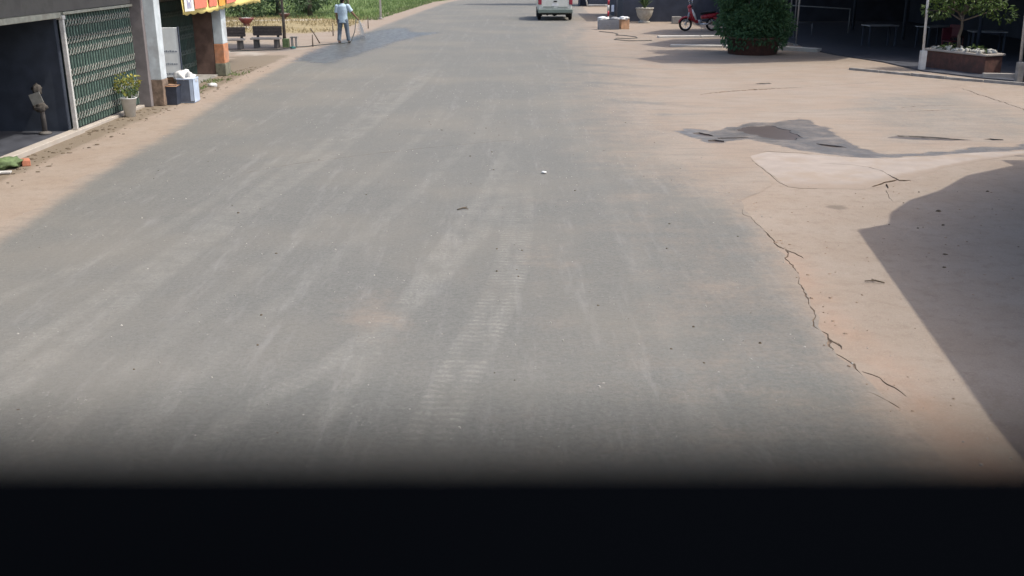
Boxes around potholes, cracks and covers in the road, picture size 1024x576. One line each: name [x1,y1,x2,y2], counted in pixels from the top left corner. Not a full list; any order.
pothole [736,125,802,140]
crack [700,82,871,95]
crack [742,210,906,408]
crack [830,163,910,199]
